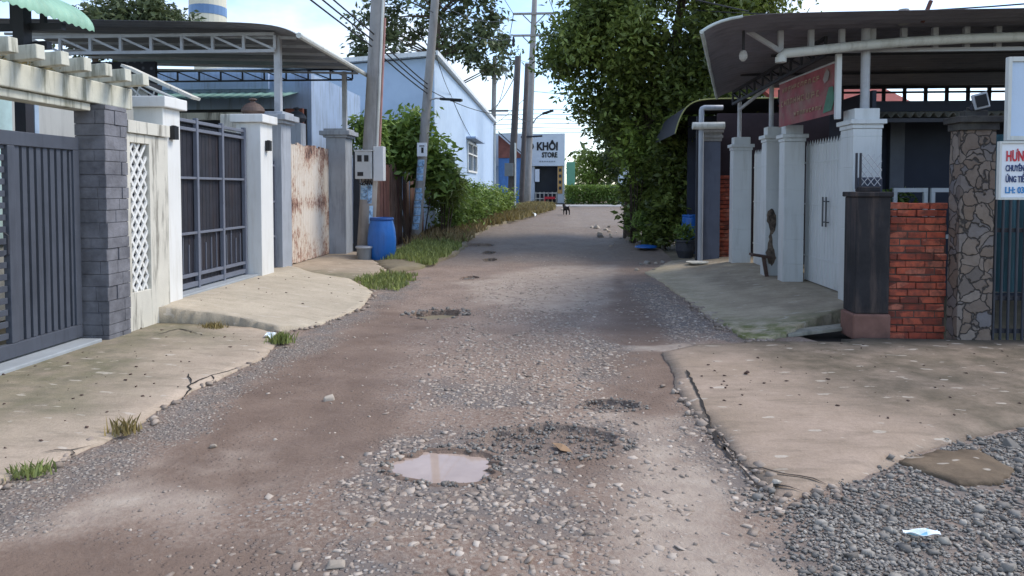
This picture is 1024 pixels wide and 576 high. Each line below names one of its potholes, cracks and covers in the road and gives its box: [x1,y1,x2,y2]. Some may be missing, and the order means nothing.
crack [183,368,235,398]
crack [686,370,826,495]
pothole [400,307,471,321]
pothole [576,397,649,413]
pothole [377,442,506,487]
